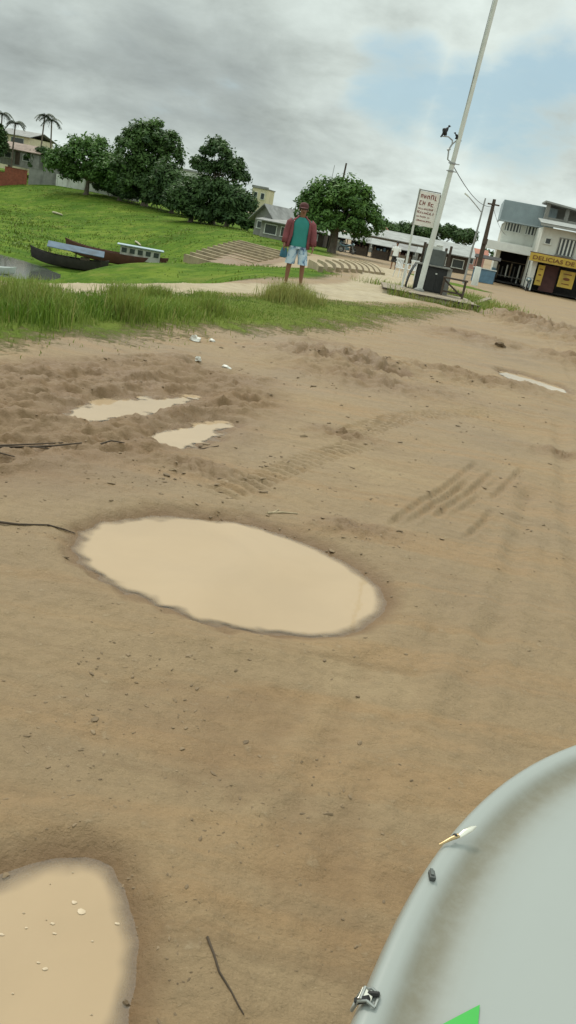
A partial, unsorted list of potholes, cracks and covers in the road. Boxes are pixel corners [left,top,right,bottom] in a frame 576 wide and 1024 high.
pothole [0,825,178,1024]
pothole [34,495,423,650]
pothole [37,381,229,424]
pothole [131,405,258,450]
pothole [479,363,576,396]
